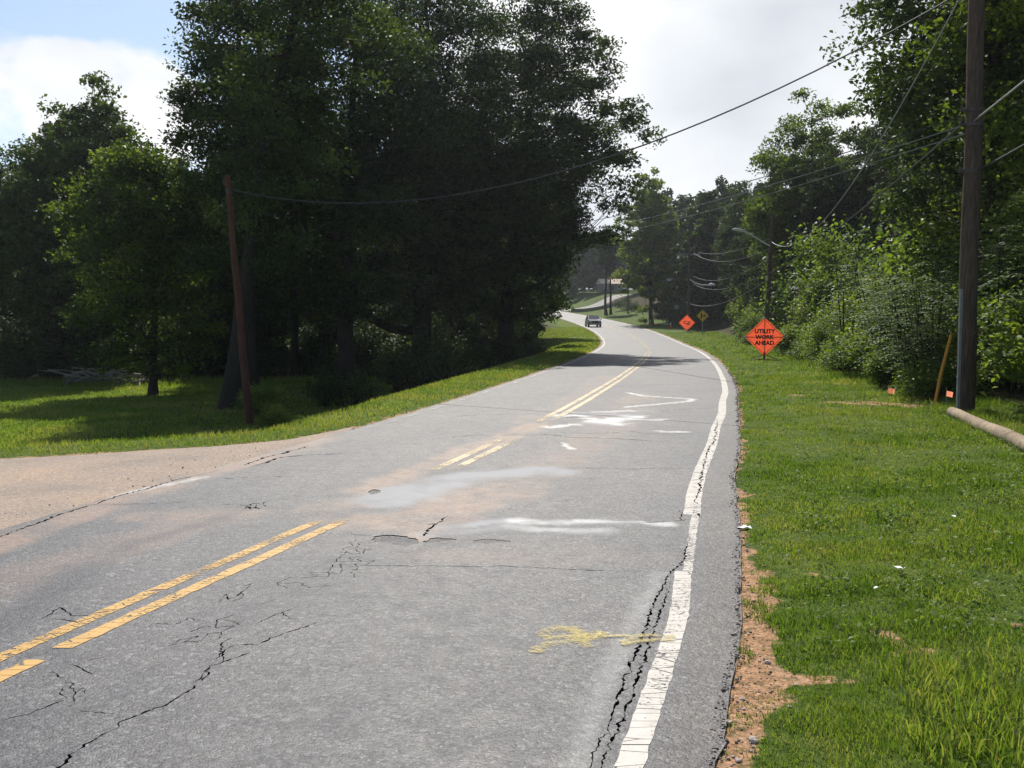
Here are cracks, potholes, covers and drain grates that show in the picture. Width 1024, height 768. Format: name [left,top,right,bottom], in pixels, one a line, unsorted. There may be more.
crack [243,447,340,478]
crack [277,533,690,768]
crack [3,584,317,768]
